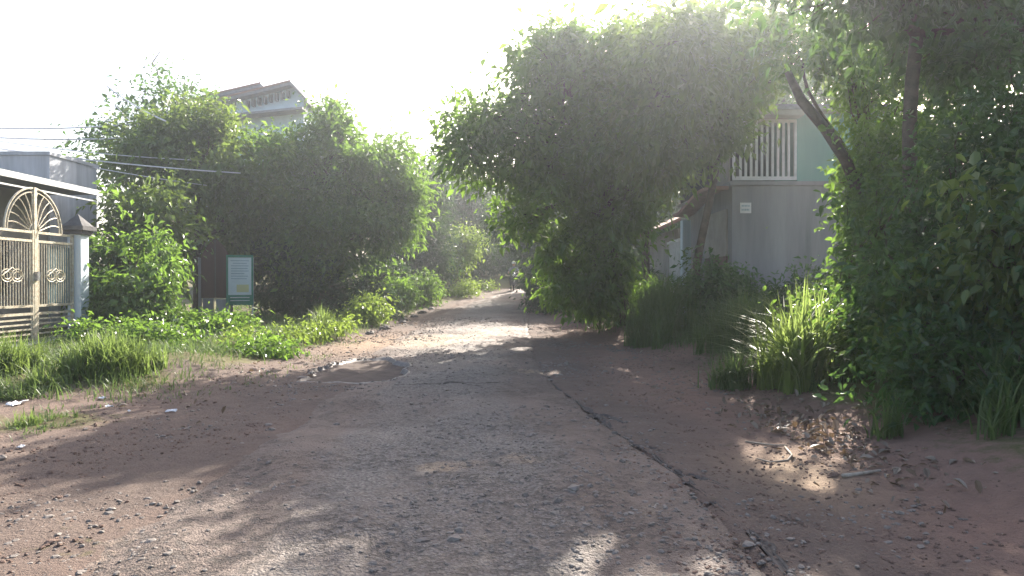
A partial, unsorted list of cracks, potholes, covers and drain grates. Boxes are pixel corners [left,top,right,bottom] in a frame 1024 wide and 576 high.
pothole [296,356,413,384]
crack [553,384,797,576]
